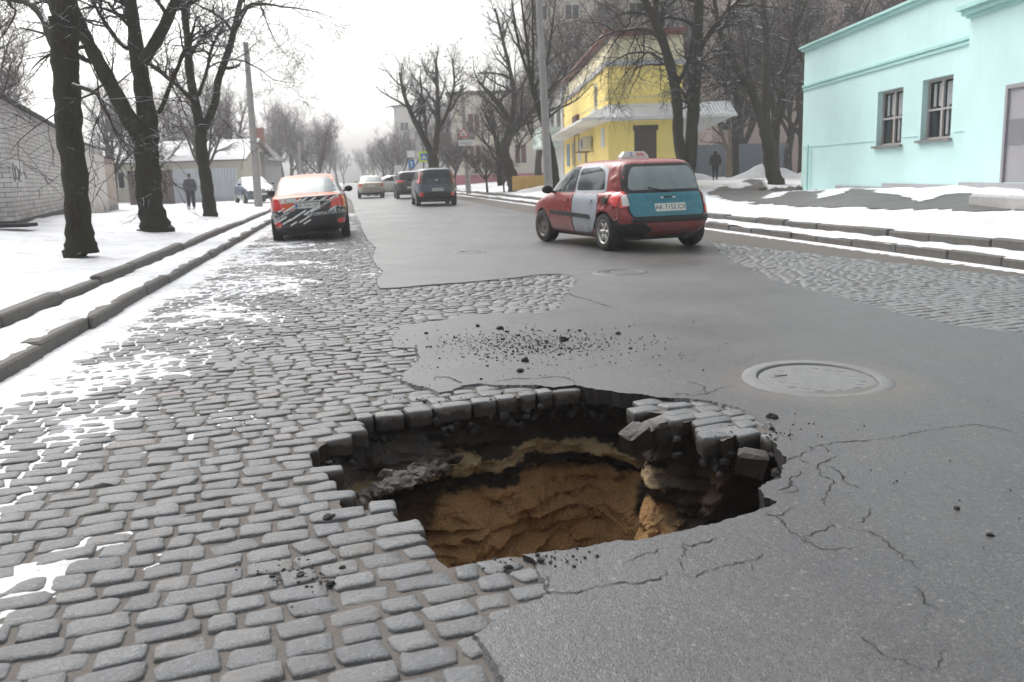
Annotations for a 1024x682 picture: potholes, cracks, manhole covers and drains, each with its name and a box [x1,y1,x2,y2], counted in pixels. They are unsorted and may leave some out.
pothole [310,394,781,568]
